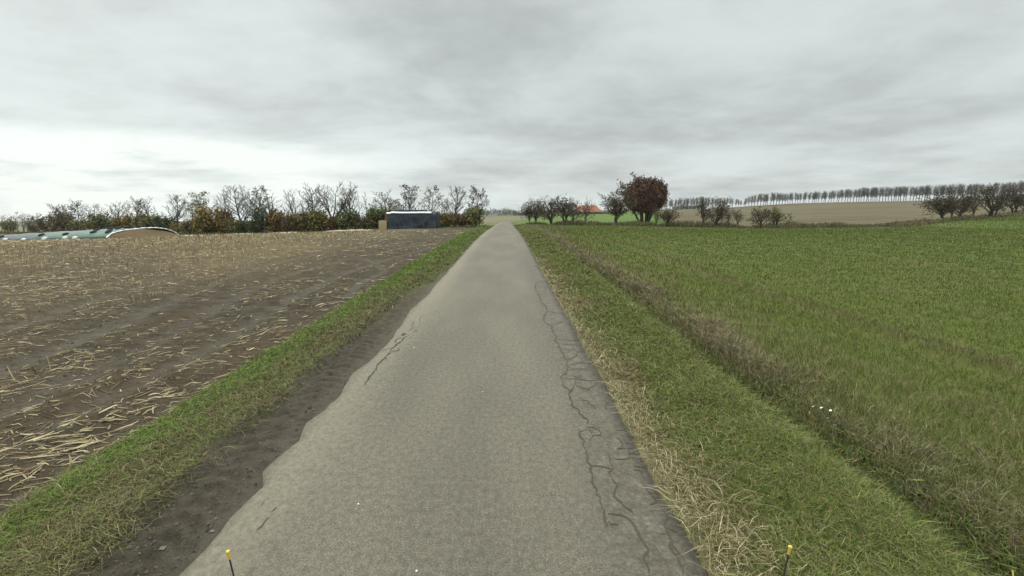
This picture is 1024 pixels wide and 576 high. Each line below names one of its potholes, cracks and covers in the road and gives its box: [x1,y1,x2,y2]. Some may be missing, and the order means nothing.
crack [535,281,684,575]
crack [364,316,422,385]
